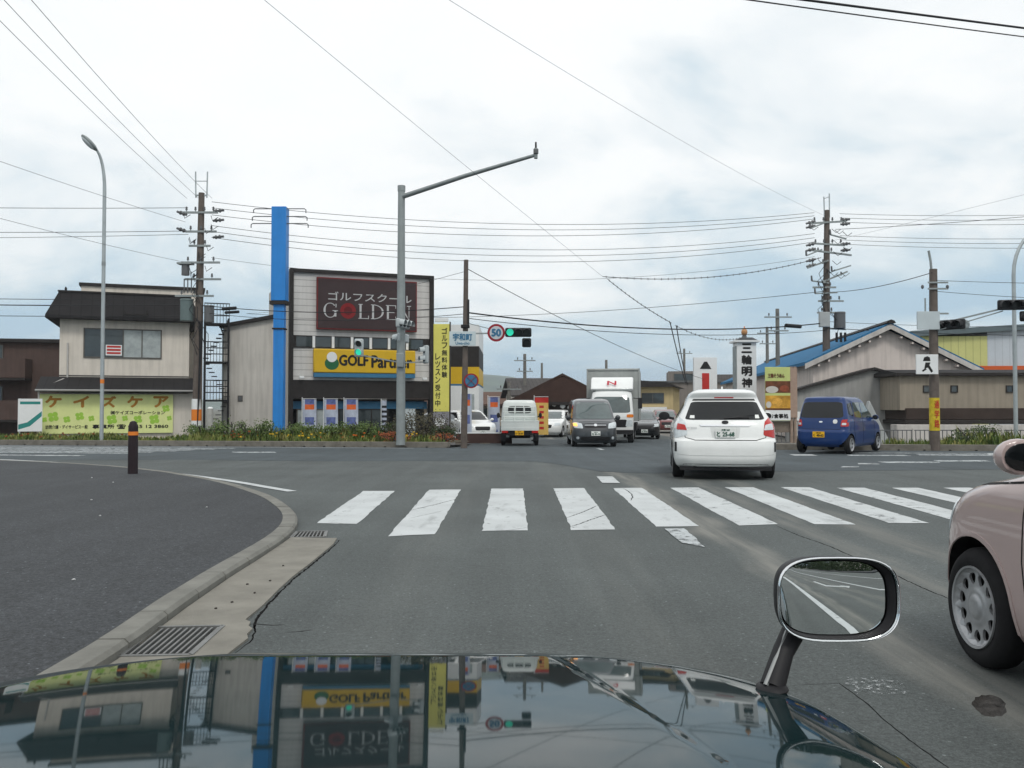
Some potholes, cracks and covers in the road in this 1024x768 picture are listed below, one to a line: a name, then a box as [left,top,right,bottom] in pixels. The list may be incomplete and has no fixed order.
drain grate [289,530,328,538]
crack [793,683,949,768]
crack [235,523,339,653]
pothole [972,695,1007,717]
drain grate [118,625,225,658]
